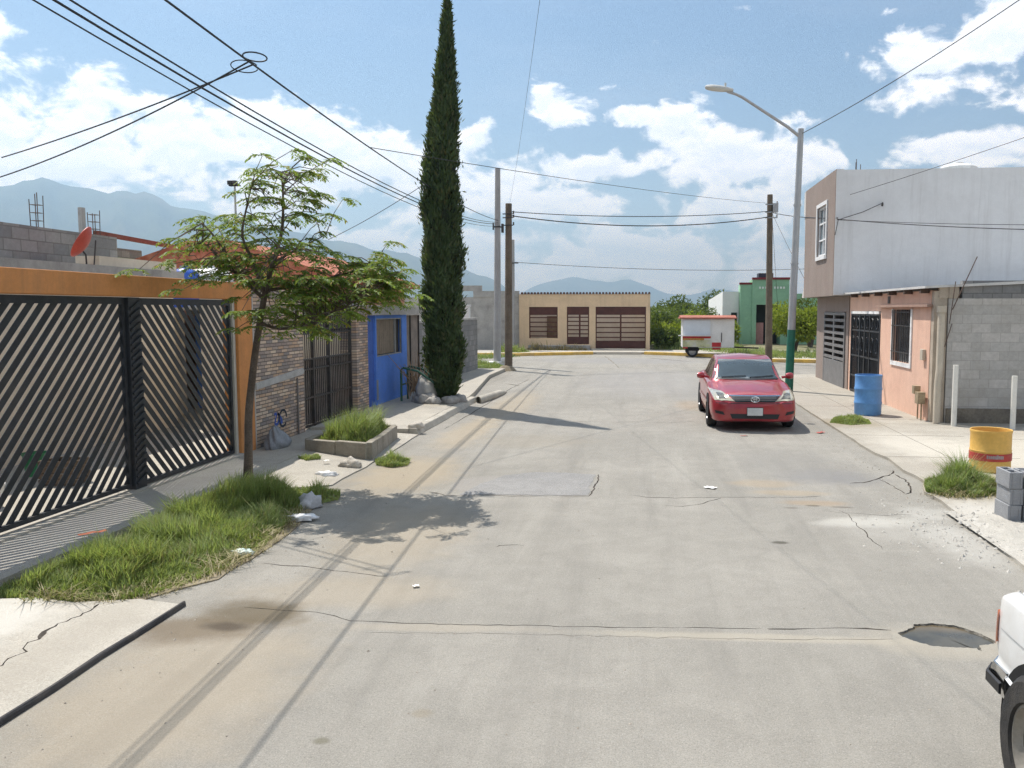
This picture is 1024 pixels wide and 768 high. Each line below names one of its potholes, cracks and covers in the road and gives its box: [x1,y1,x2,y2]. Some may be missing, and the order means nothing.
crack [633,495,886,546]
crack [855,471,912,494]
crack [1,604,99,666]
pothole [898,623,996,651]
